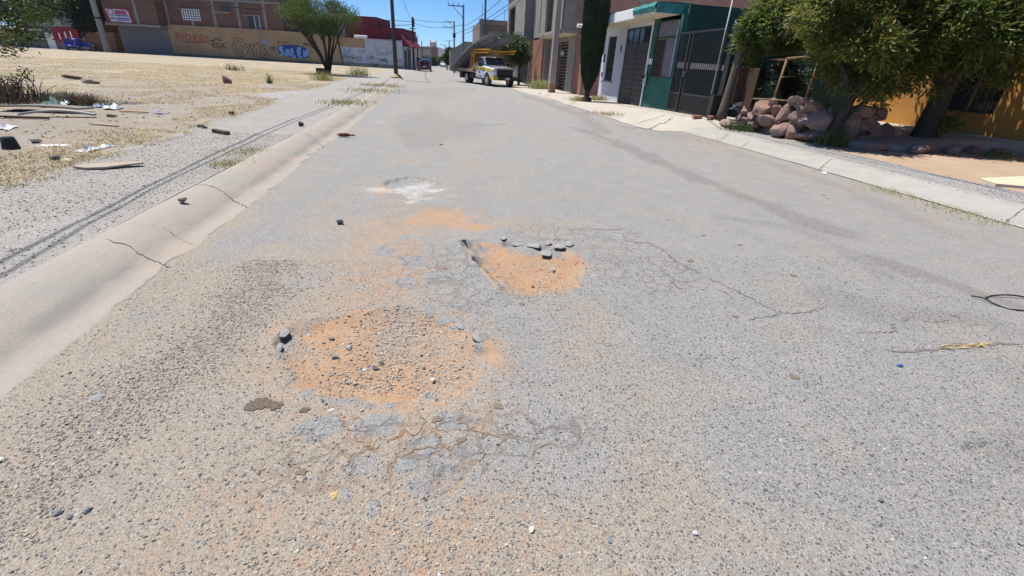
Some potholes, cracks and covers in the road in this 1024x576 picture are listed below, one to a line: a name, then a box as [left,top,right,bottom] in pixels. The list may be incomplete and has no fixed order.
pothole [375,177,454,205]
crack [108,239,172,268]
pothole [460,237,601,302]
pothole [271,301,503,417]
crack [554,229,826,320]
crack [339,413,529,471]
crack [861,316,1021,353]
